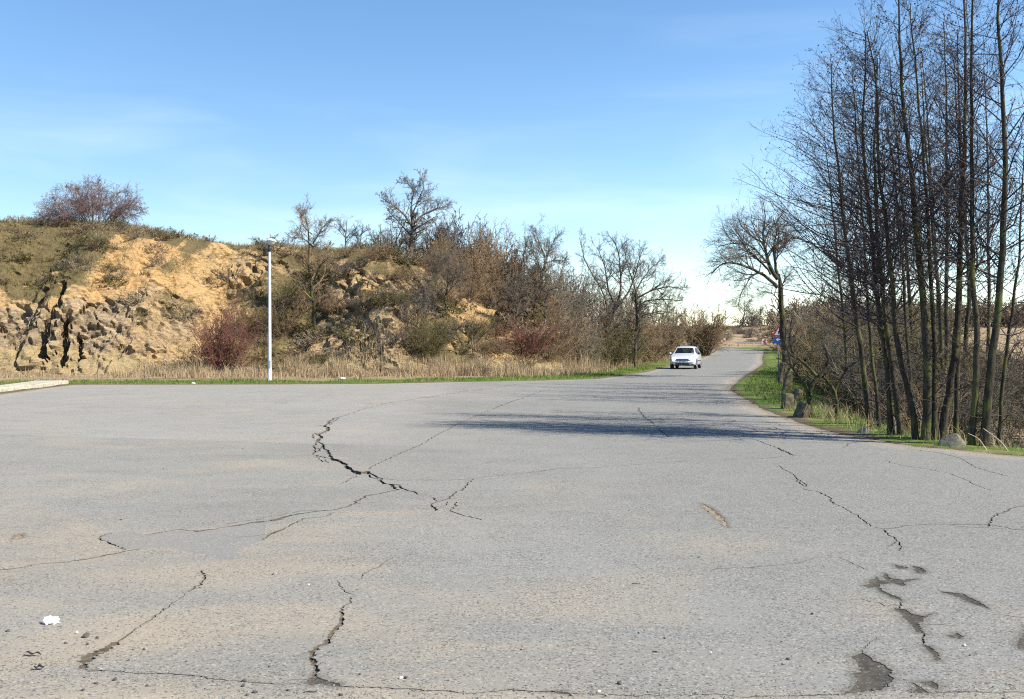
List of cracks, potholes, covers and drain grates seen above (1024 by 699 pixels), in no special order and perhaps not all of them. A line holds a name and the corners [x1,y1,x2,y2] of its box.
pothole [845,653,894,694]
pothole [943,592,987,608]
pothole [895,609,932,634]
crack [76,571,206,670]
crack [286,557,393,681]
crack [3,533,139,570]
pothole [864,574,916,600]
pothole [701,504,727,527]
crack [153,383,1022,551]
